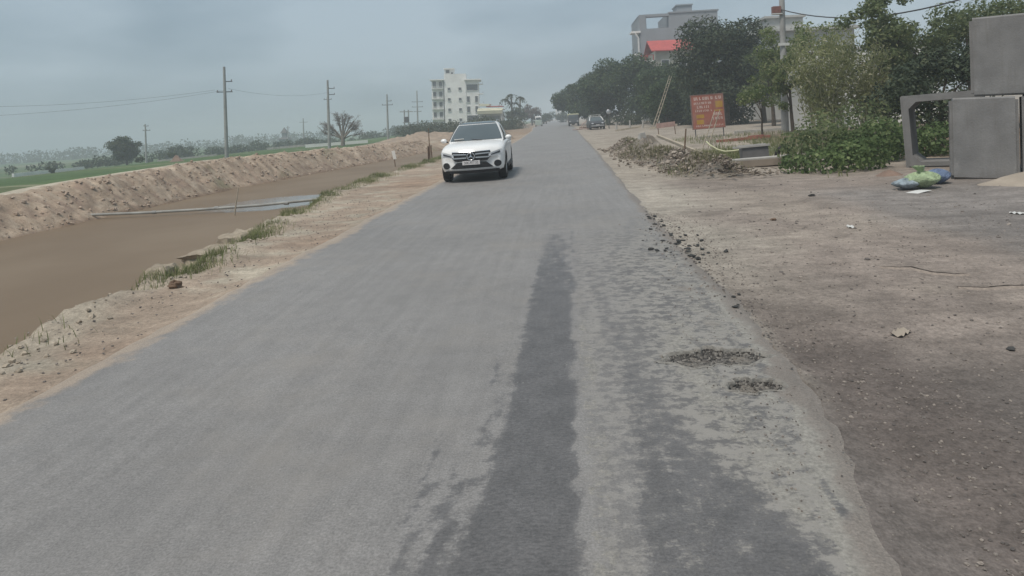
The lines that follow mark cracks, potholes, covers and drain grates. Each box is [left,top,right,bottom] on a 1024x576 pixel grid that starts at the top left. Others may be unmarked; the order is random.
pothole [724,377,789,395]
crack [880,266,1024,290]
pothole [656,345,777,369]
